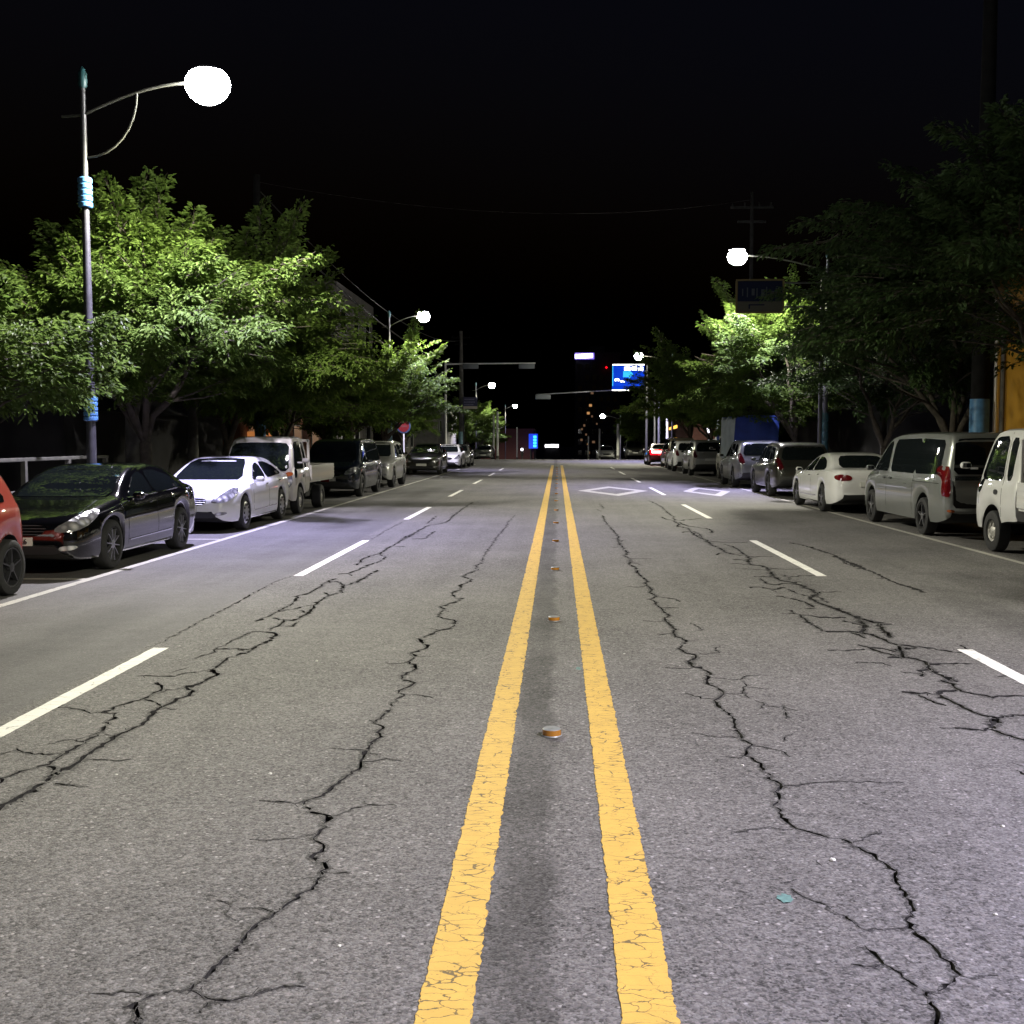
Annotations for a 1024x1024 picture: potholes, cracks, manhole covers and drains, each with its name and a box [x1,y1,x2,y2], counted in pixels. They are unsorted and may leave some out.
crack [596,501,1024,1024]
crack [0,502,516,1024]
